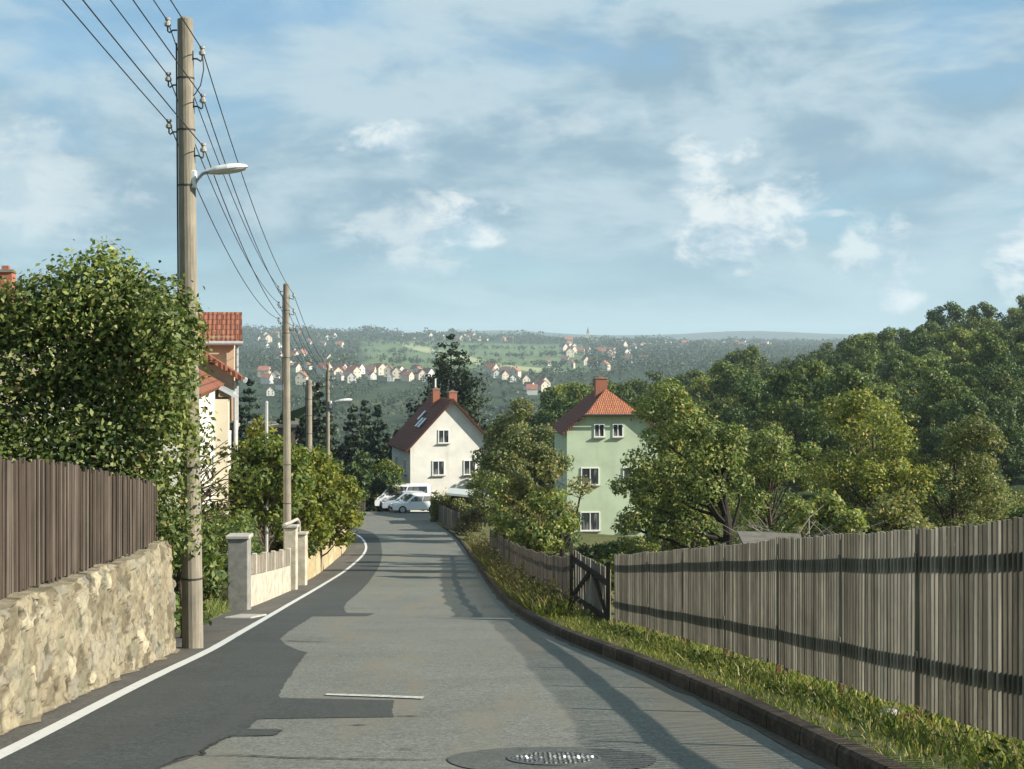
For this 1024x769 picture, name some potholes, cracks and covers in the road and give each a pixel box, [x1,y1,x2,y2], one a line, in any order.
manhole cover [507,751,602,766]
